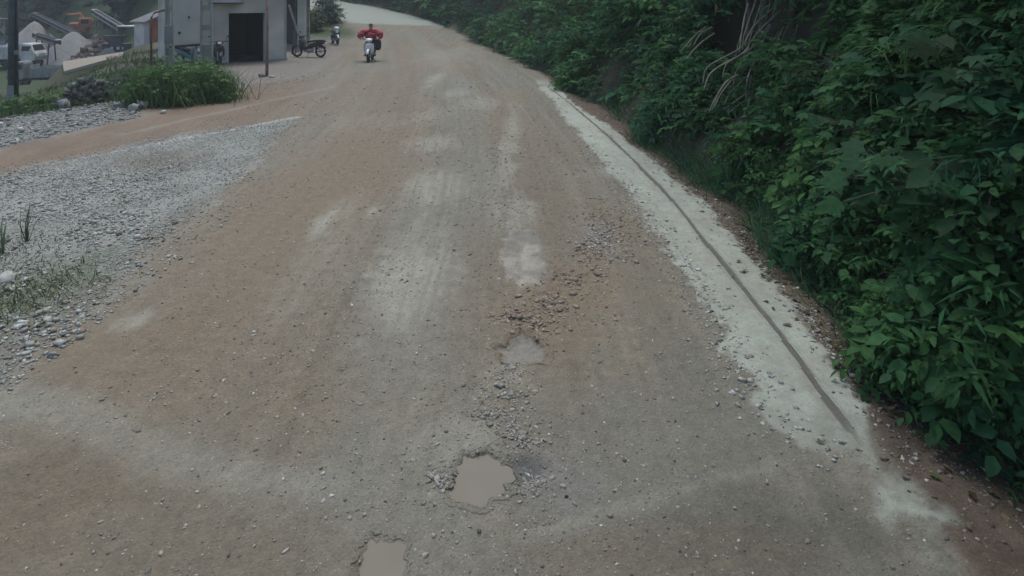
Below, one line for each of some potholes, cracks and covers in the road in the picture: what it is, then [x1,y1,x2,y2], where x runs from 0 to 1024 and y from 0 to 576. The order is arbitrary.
pothole [346,528,413,576]
pothole [440,442,523,514]
pothole [485,324,555,370]
